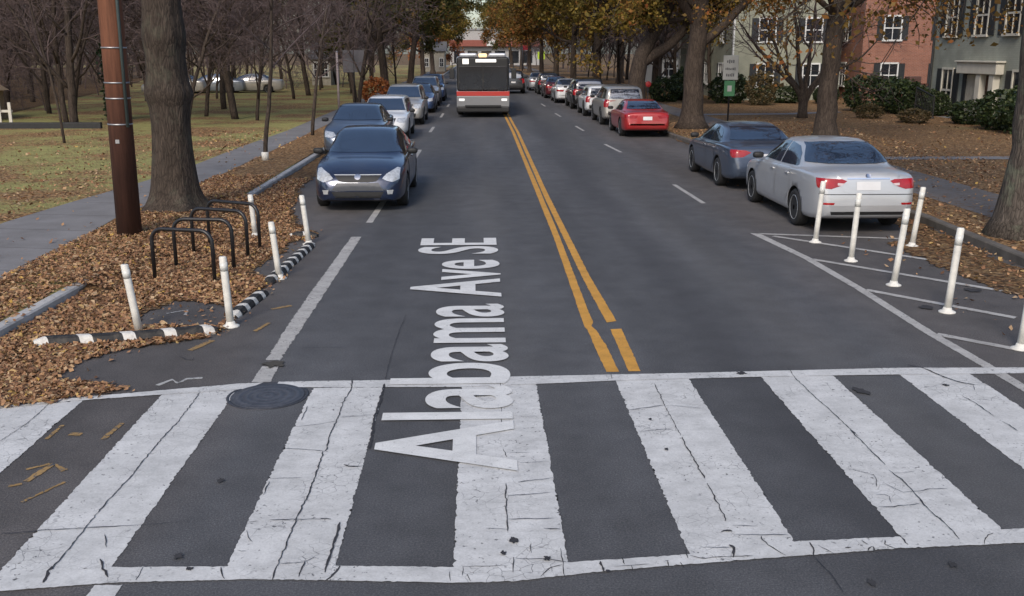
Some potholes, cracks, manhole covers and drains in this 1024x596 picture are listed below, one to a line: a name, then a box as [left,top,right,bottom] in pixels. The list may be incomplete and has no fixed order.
crack [667,525,785,566]
manhole cover [226,382,309,410]
crack [295,380,385,448]
crack [848,468,947,508]
crack [272,518,340,580]
crack [809,535,906,591]
crack [13,520,189,577]
crack [497,461,558,531]
crack [599,558,642,572]
crack [449,544,566,581]
